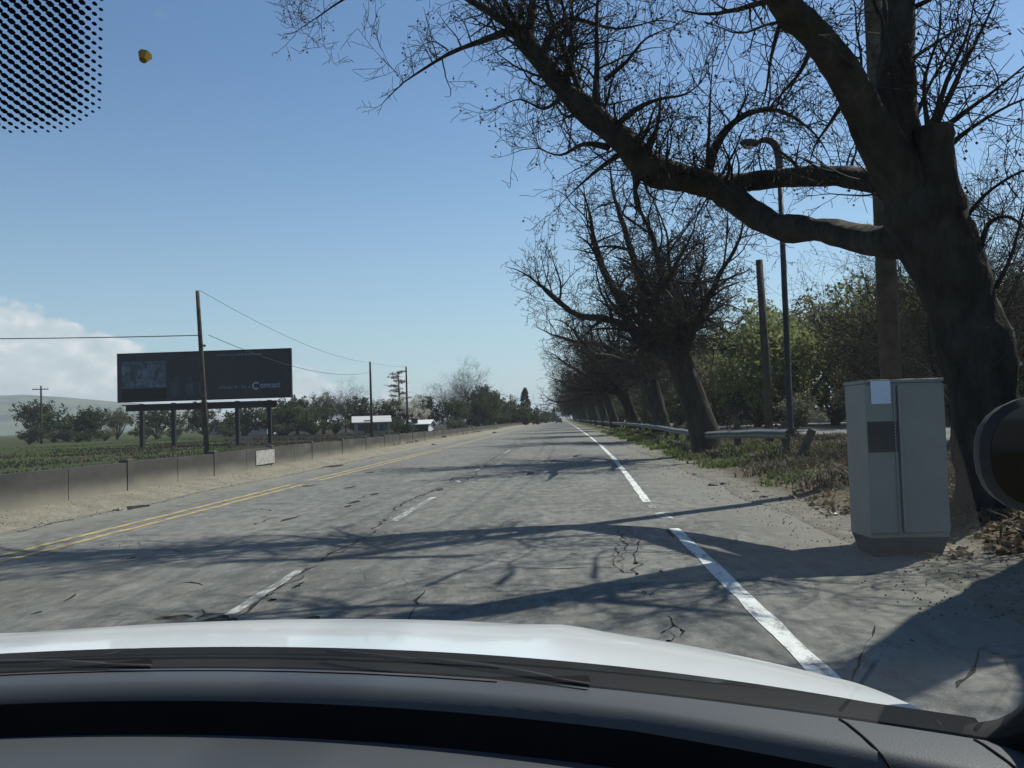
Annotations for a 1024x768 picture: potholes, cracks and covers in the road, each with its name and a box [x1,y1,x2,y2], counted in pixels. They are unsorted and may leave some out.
crack [195,453,533,619]
crack [955,644,987,687]
crack [520,526,643,573]
crack [661,614,684,641]
crack [851,626,875,681]
